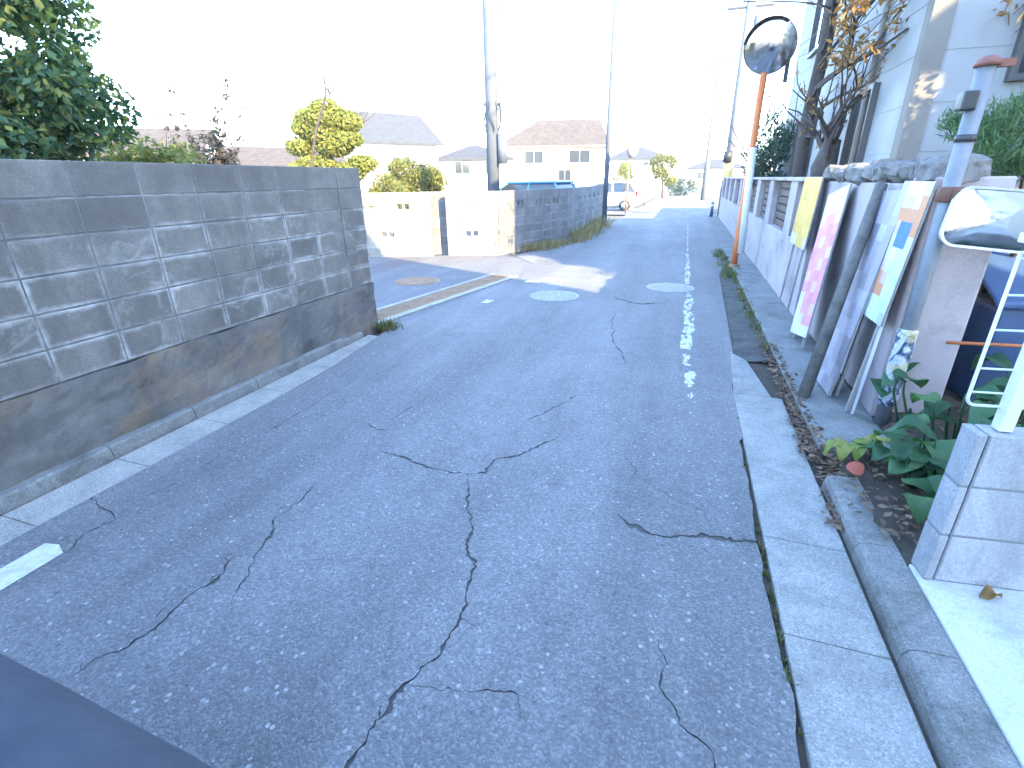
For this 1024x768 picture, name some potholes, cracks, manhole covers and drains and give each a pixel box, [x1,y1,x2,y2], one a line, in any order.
crack [611,297,655,362]
crack [66,485,313,680]
manhole cover [646,283,695,292]
crack [657,640,716,768]
manhole cover [530,291,579,301]
crack [618,455,757,546]
crack [344,437,558,768]
manhole cover [394,277,440,286]
